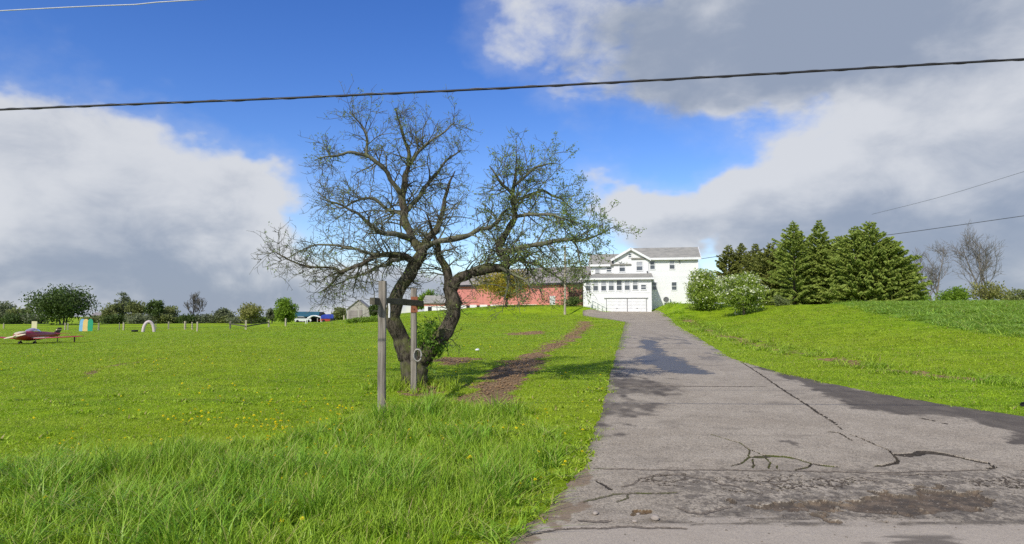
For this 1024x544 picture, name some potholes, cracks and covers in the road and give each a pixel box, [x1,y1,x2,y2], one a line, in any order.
crack [525,362,1024,537]
pothole [726,484,997,524]
